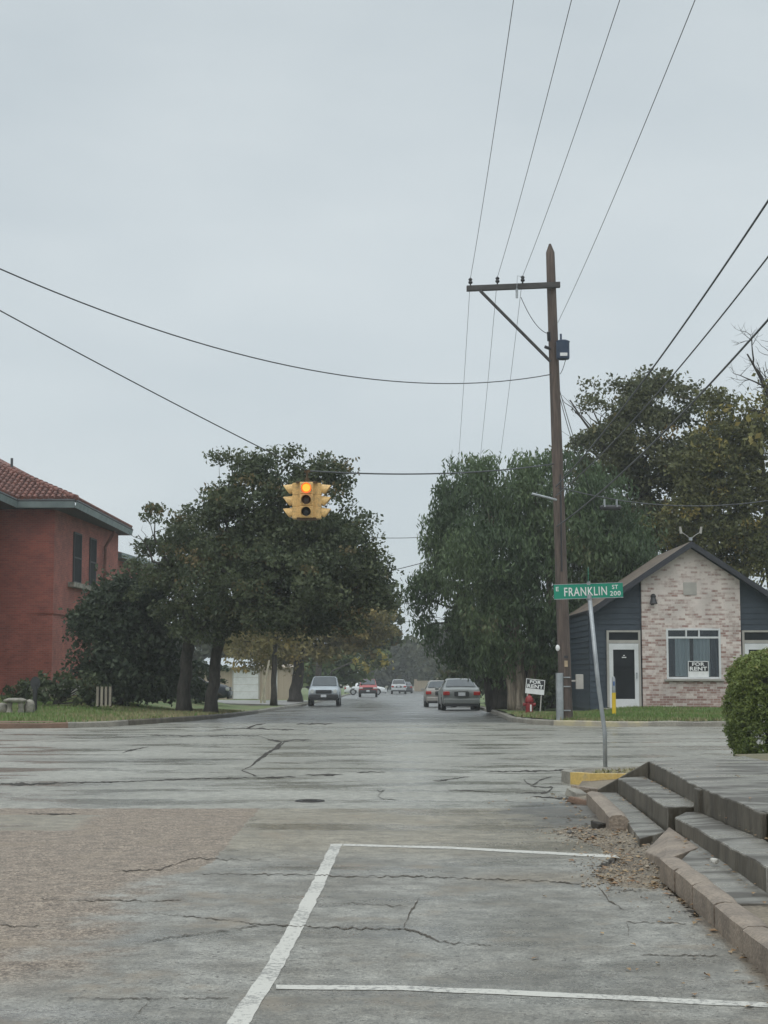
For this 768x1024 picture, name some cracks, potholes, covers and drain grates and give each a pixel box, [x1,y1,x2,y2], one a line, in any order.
crack [0,771,375,786]
crack [113,857,592,885]
pothole [553,827,702,918]
crack [142,897,484,945]
crack [490,769,568,799]
